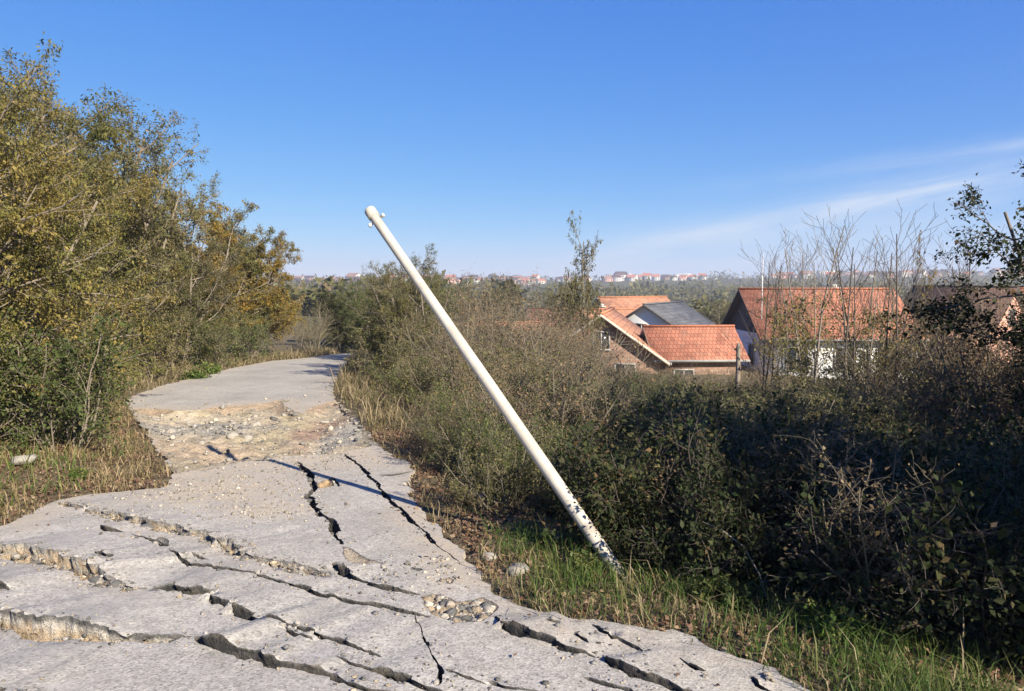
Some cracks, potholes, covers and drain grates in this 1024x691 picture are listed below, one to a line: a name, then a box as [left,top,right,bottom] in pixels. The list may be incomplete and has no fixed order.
pothole [132,400,372,473]
crack [0,453,775,691]
pothole [422,594,499,622]
